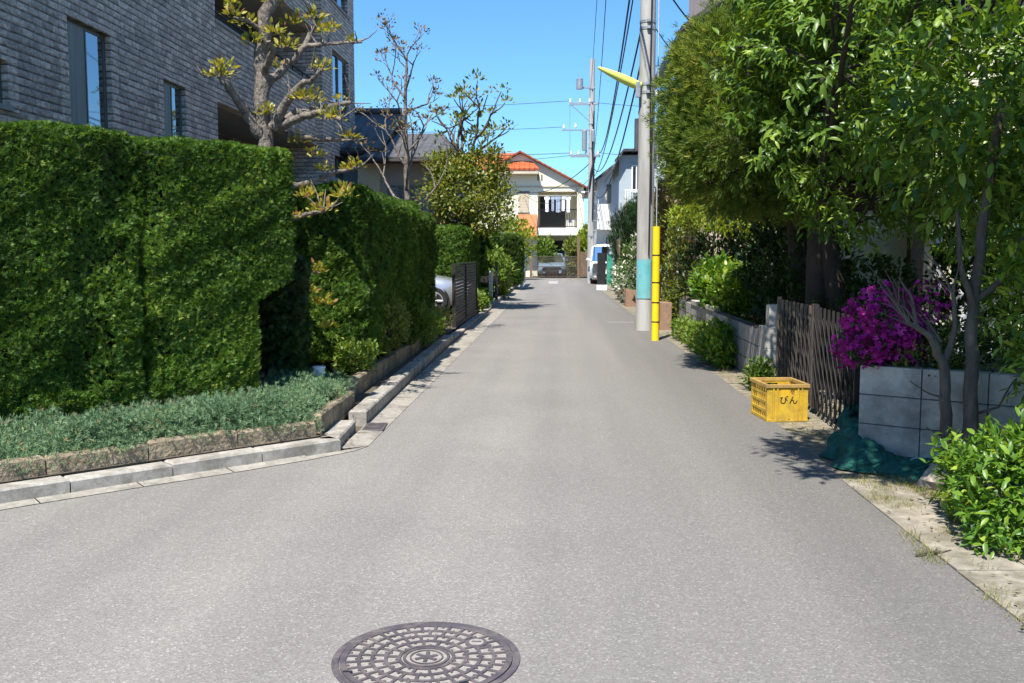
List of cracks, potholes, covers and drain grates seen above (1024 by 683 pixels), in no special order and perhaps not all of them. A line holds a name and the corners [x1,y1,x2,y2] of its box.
manhole cover [331,622,520,683]
drain grate [362,423,388,432]
